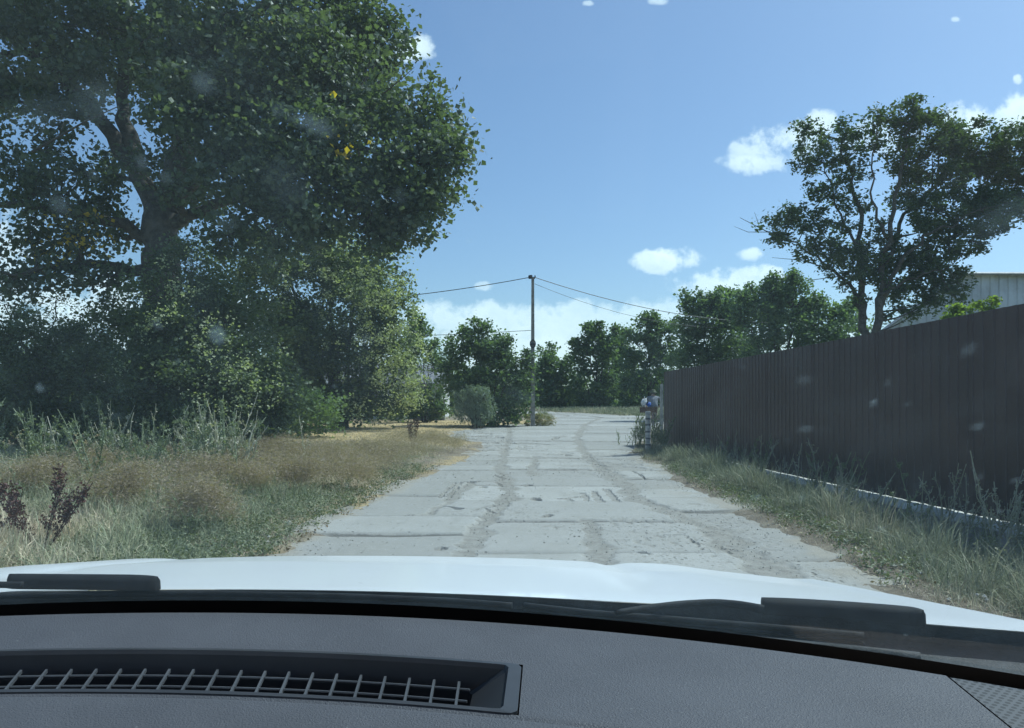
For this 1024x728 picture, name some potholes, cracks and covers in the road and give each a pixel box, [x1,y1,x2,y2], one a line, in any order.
crack [661,534,733,555]
